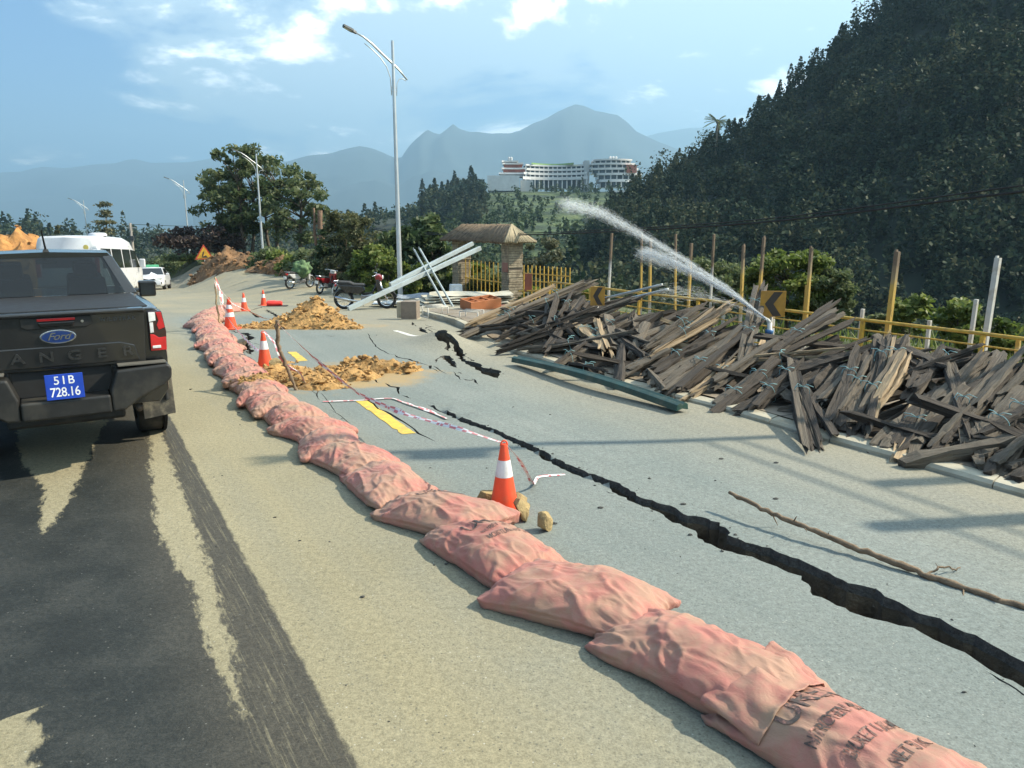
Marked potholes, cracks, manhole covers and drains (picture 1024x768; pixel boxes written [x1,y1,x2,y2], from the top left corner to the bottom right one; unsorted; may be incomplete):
crack [312,380,1024,695]
crack [368,334,478,384]
